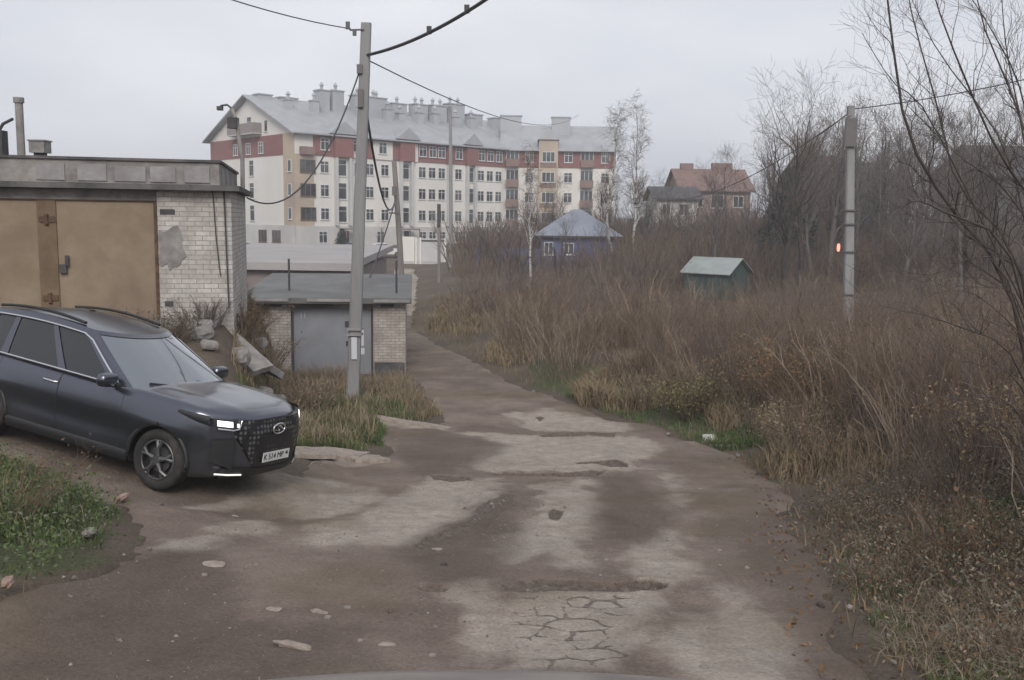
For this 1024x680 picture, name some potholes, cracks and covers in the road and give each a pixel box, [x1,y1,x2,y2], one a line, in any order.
pothole [529,415,551,423]
pothole [566,457,638,468]
pothole [485,574,687,597]
crack [513,595,633,668]
pothole [534,506,576,524]
pothole [421,473,482,483]
